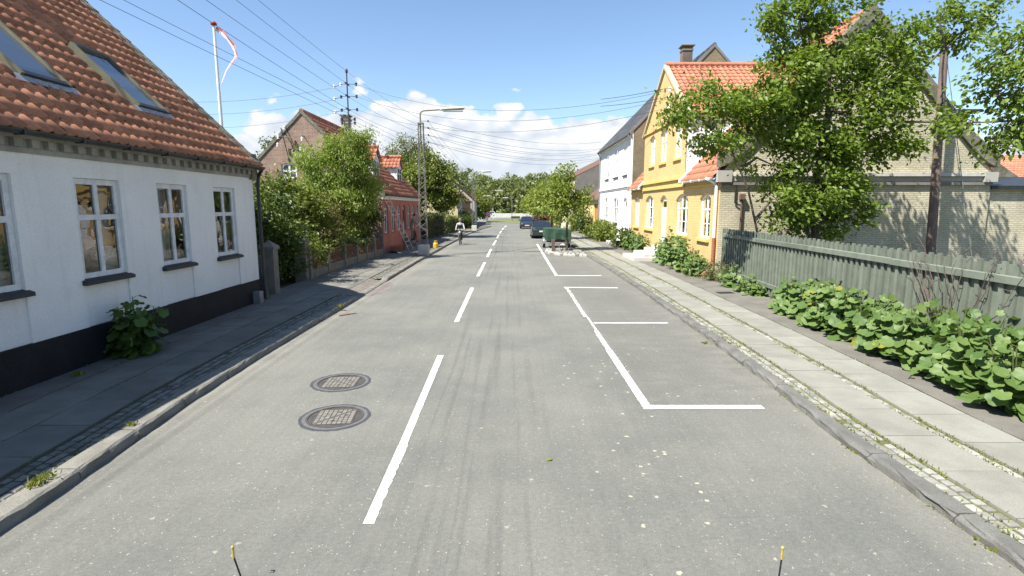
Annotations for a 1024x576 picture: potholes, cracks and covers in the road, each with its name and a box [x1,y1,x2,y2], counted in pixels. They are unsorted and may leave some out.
manhole cover [310,373,371,392]
manhole cover [298,404,371,432]
